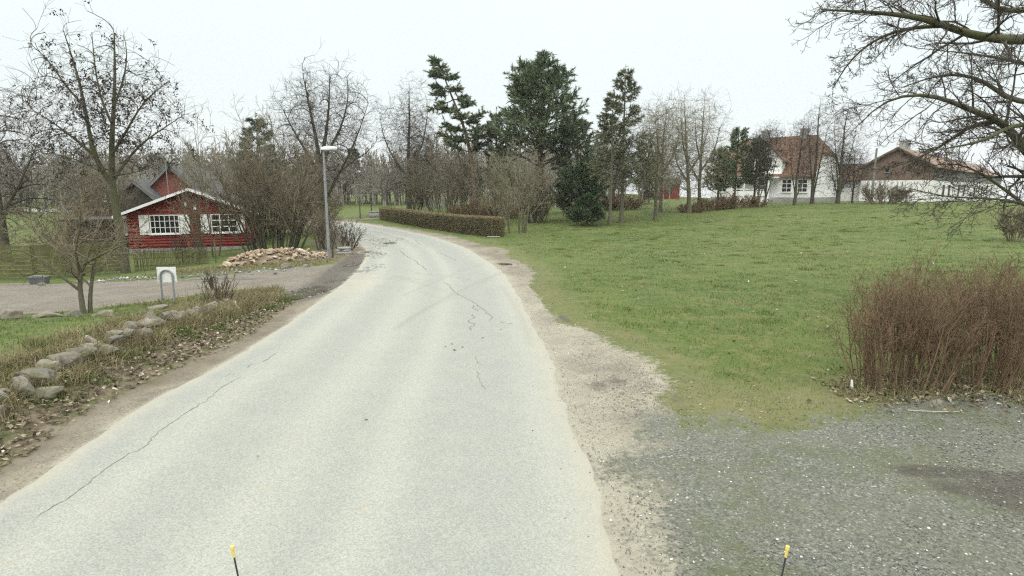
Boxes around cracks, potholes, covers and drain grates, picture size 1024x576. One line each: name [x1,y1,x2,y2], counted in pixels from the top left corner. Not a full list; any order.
crack [37,354,274,517]
crack [355,240,426,273]
